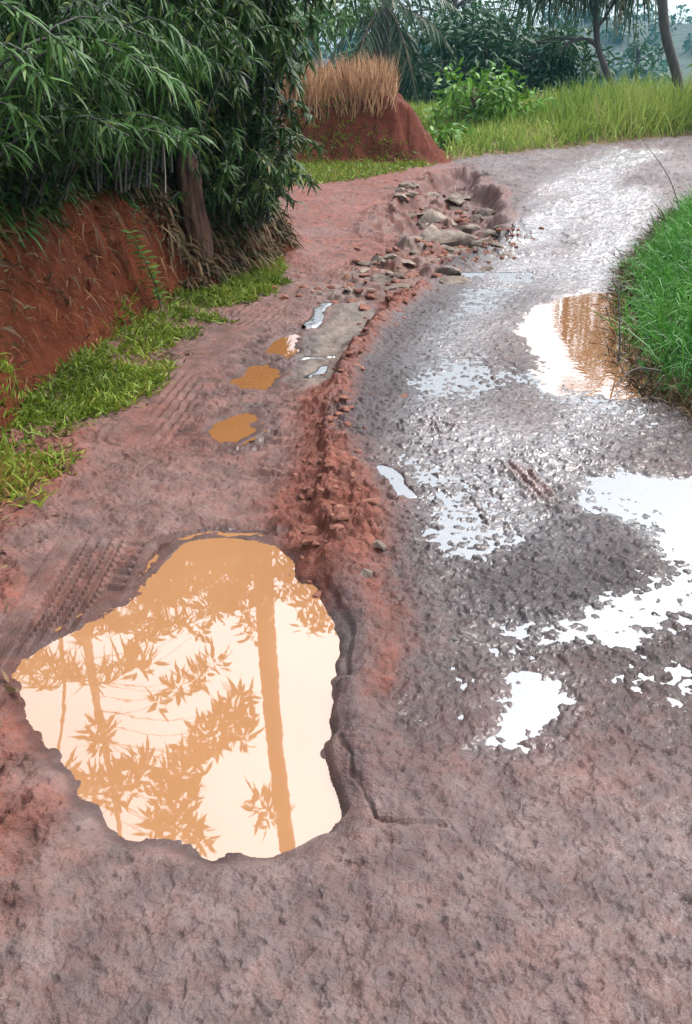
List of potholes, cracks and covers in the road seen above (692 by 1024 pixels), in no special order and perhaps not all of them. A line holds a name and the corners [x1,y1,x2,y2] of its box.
pothole [0,532,373,871]
pothole [361,166,523,245]
crack [331,728,457,835]
pothole [249,331,309,361]
pothole [195,406,271,449]
pothole [506,287,671,401]
pothole [218,361,294,393]
